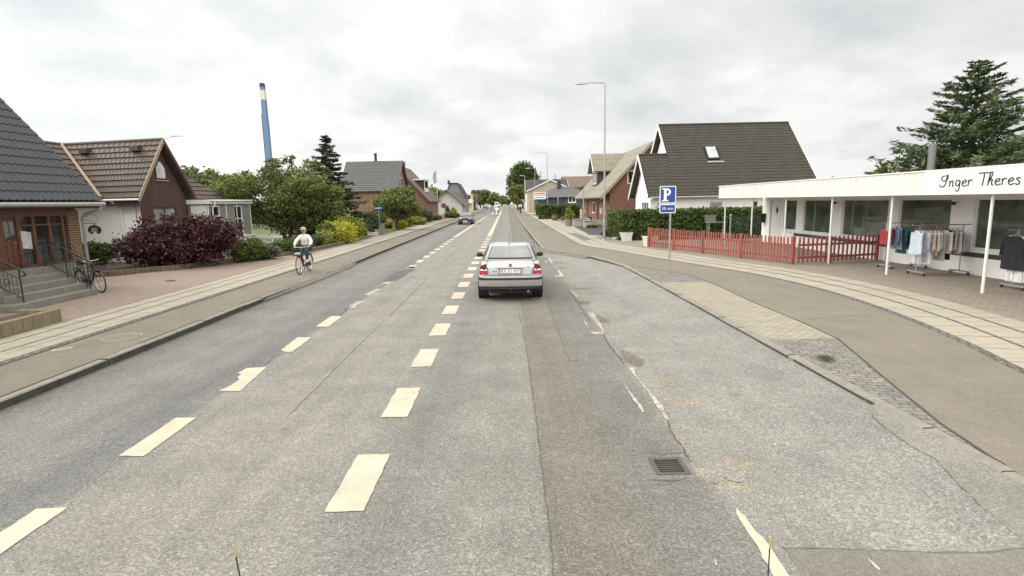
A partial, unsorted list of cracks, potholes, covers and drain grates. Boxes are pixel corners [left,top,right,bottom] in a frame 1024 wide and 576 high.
crack [869,410,982,507]
manhole cover [99,332,144,342]
crack [570,293,624,364]
drain grate [648,457,691,475]
crack [647,422,690,460]
